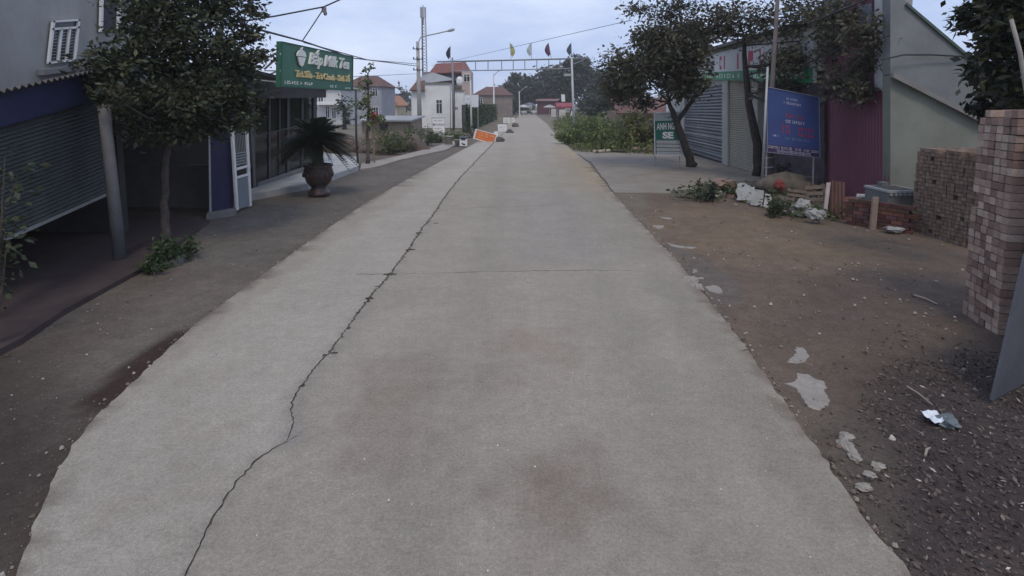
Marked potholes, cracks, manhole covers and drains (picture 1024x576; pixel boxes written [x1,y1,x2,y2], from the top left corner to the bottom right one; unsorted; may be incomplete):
crack [184,131,629,576]
